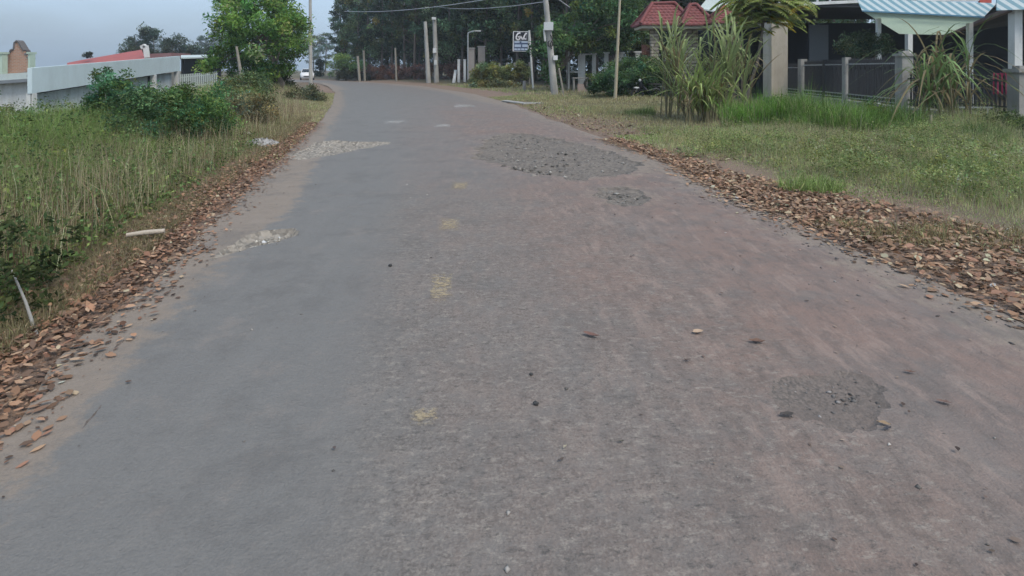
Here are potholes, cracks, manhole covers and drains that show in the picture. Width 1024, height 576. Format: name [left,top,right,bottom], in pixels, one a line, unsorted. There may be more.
pothole [593,186,652,207]
pothole [767,370,891,433]
pothole [471,133,645,181]
